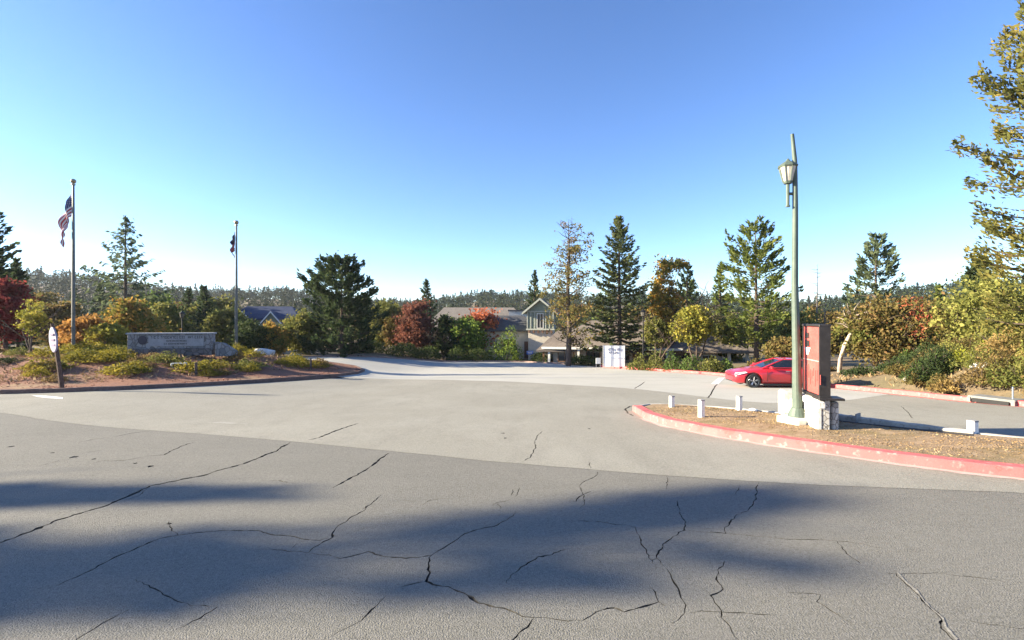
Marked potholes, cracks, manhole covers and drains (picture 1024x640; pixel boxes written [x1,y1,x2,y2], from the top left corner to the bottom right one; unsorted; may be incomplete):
crack [0,444,290,543]
crack [890,572,1024,640]
crack [333,454,387,488]
crack [61,463,880,640]
